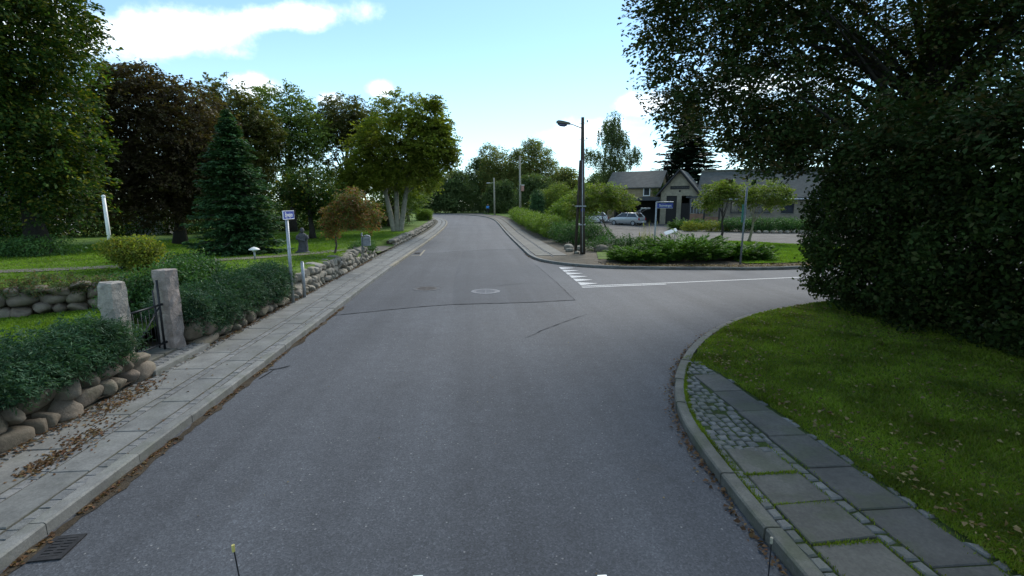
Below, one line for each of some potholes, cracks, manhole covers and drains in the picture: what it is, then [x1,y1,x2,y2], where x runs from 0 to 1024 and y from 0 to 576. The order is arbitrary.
drain grate [27,533,87,563]
crack [341,269,587,337]
